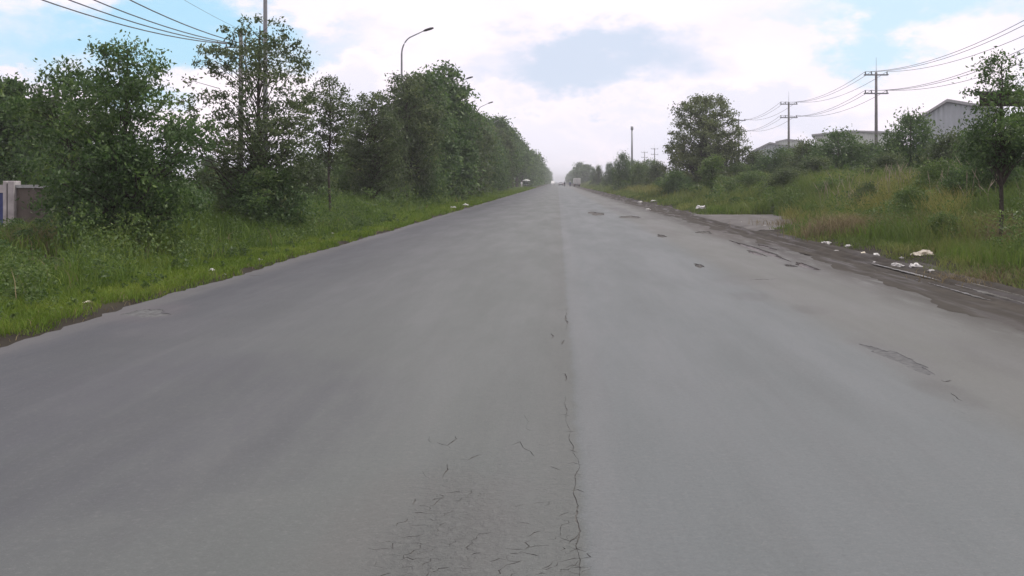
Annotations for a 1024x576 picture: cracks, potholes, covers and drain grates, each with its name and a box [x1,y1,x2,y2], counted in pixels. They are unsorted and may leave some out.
crack [497,313,592,576]
crack [368,491,505,576]
